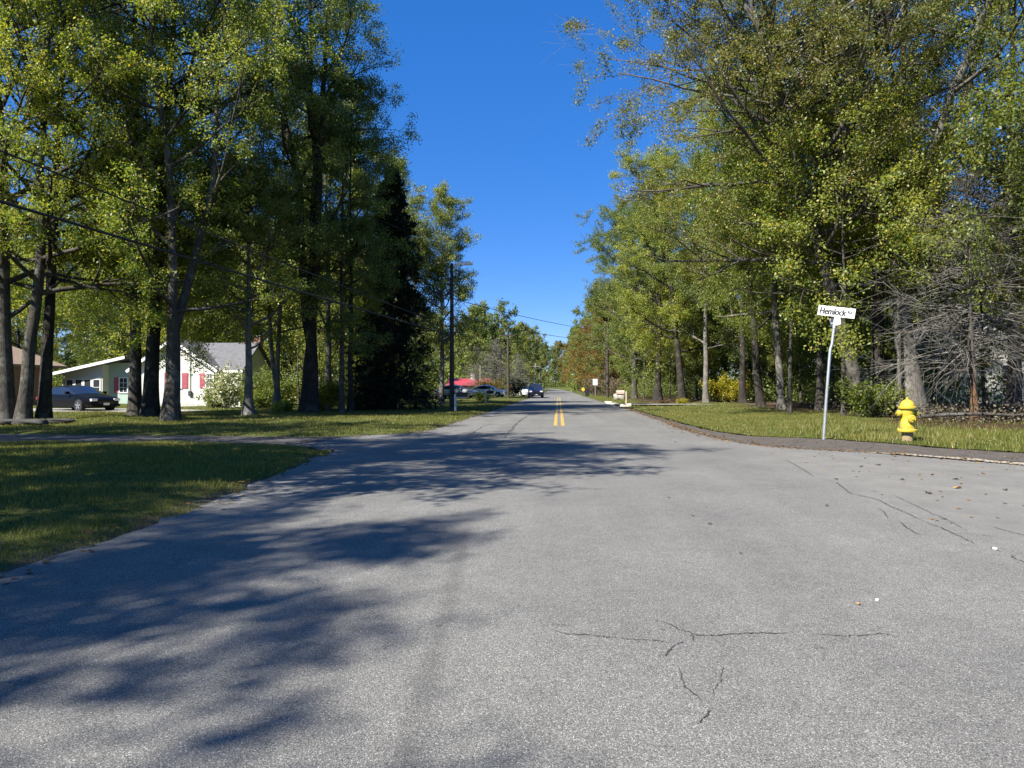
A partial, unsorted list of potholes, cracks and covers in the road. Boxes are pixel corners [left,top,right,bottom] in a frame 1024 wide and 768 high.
crack [551,620,890,723]
crack [789,461,1024,562]
